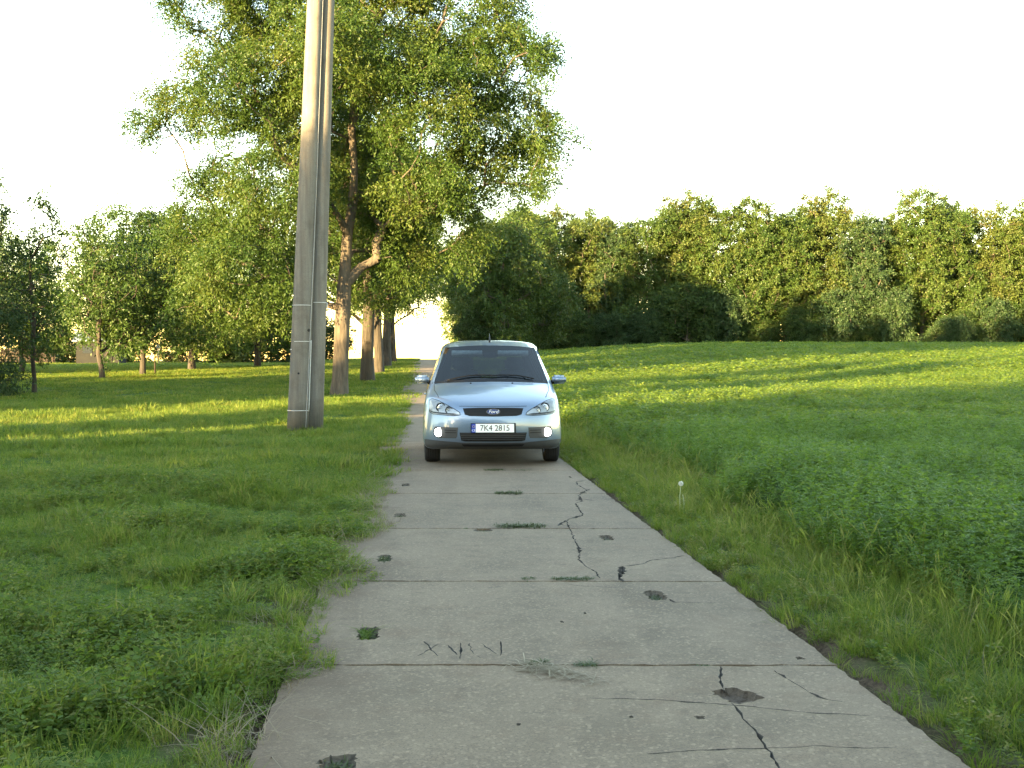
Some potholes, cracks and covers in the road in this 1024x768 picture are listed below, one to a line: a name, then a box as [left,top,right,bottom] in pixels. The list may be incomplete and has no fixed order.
pothole [316,754,358,768]
pothole [643,590,667,600]
crack [598,666,889,768]
pothole [712,687,765,704]
crack [558,481,685,588]
pothole [356,626,381,640]
